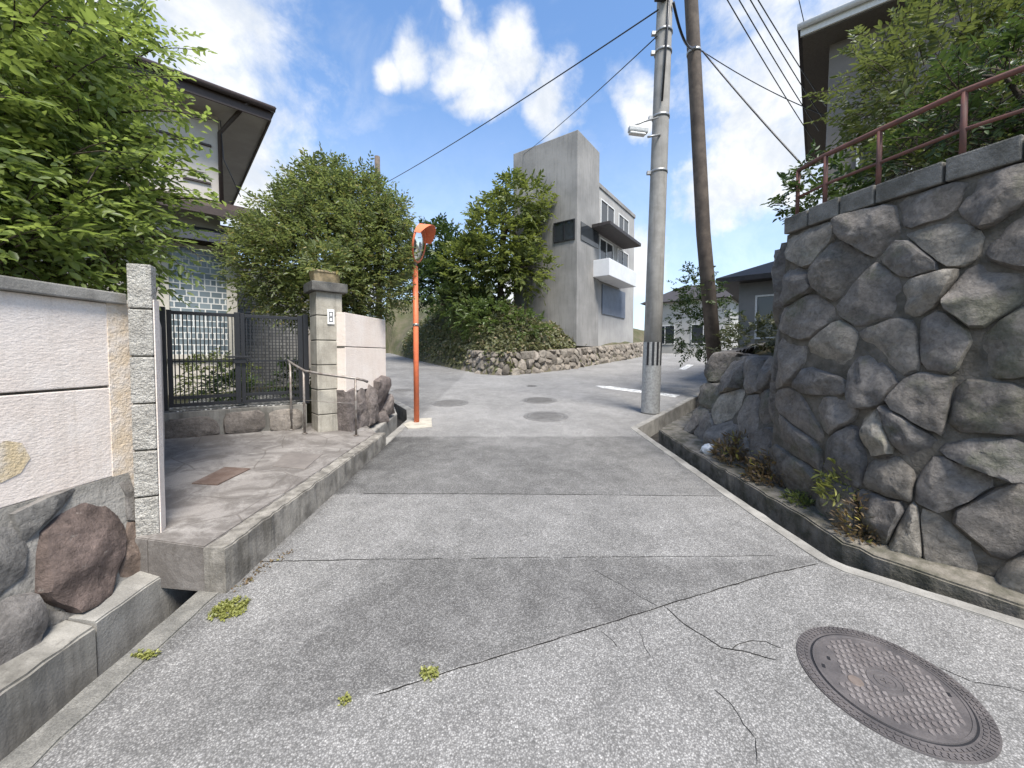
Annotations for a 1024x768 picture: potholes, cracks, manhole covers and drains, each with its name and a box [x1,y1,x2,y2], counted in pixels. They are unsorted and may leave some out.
manhole cover [523,411,569,422]
manhole cover [432,399,468,407]
crack [714,689,757,756]
crack [262,555,815,695]
manhole cover [796,626,1003,765]
